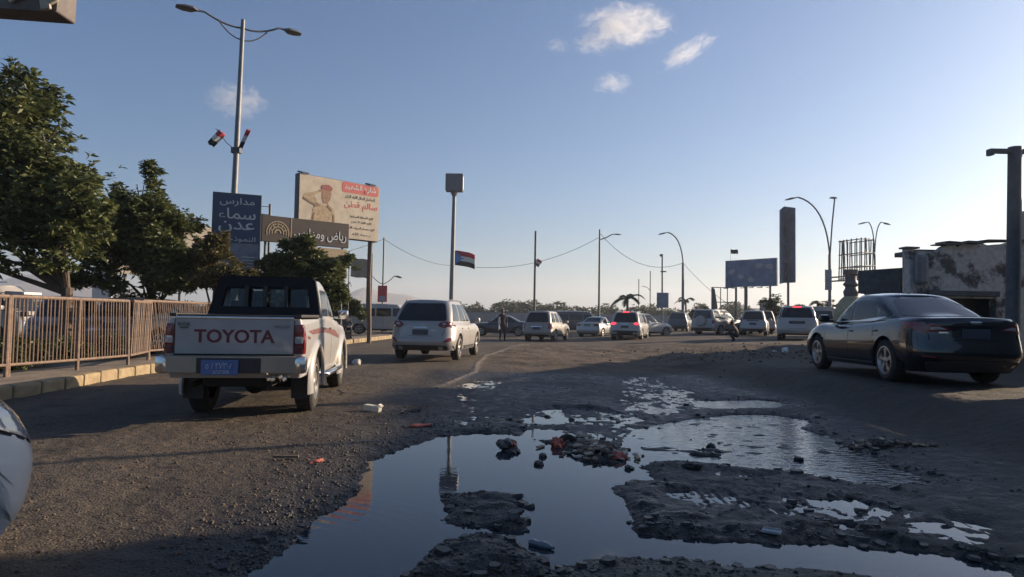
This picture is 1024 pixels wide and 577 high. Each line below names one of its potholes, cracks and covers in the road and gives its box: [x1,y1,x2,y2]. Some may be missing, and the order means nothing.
pothole [676,396,803,409]
pothole [498,423,583,440]
pothole [209,426,1024,577]
pothole [595,410,963,492]
pothole [432,374,516,427]
pothole [598,374,734,418]
